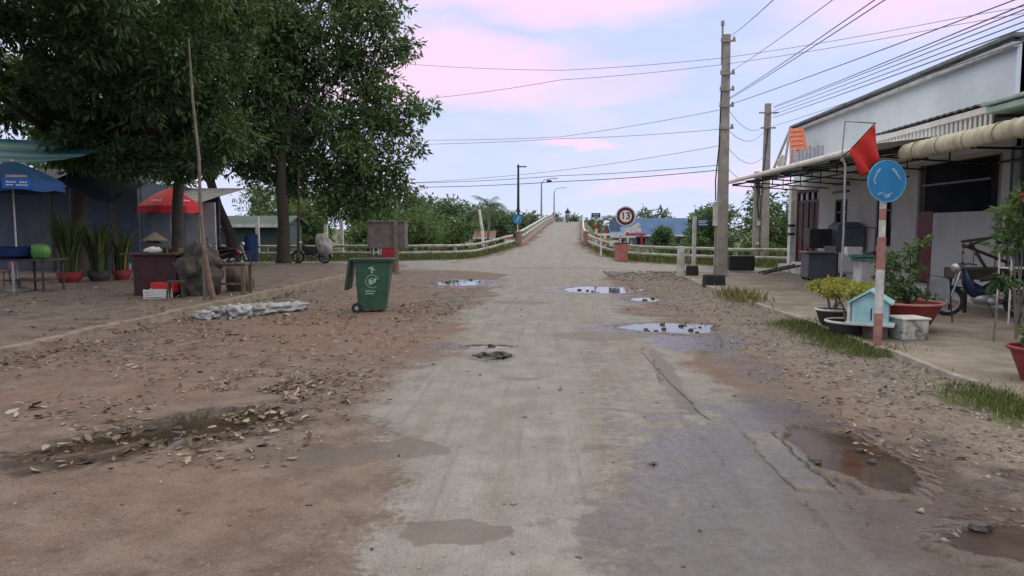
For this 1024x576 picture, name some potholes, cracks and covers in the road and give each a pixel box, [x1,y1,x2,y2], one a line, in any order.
pothole [913,514,1024,573]
pothole [0,404,325,462]
pothole [742,421,946,504]
pothole [428,278,496,287]
crack [641,352,710,420]
pothole [606,320,739,336]
pothole [555,285,654,294]
pothole [459,343,521,351]
pothole [466,351,521,363]
